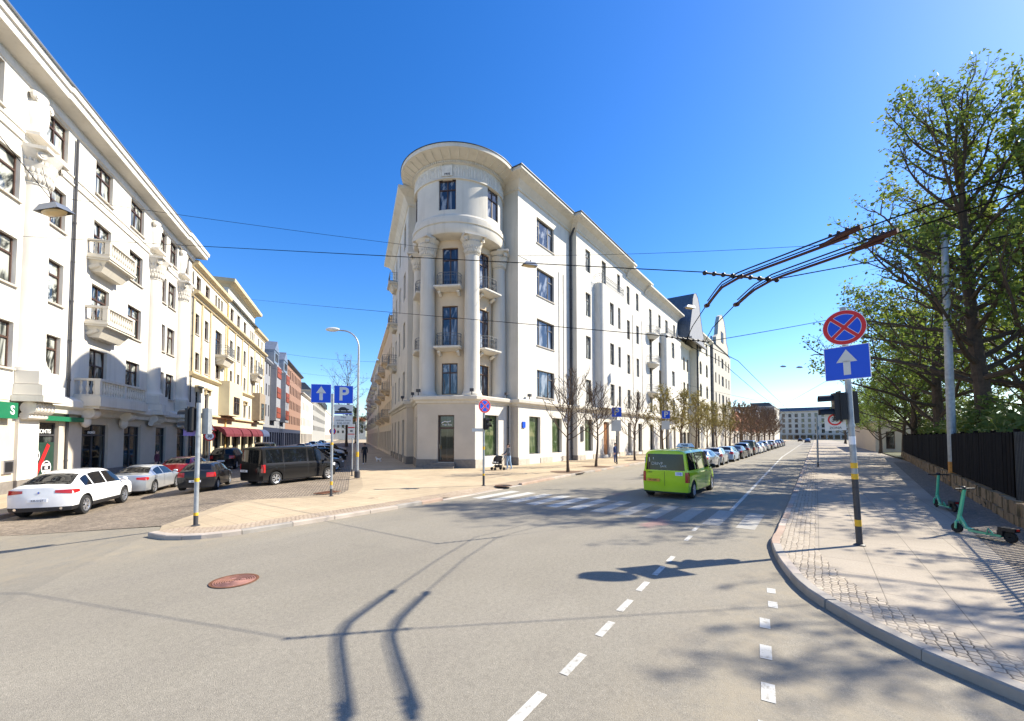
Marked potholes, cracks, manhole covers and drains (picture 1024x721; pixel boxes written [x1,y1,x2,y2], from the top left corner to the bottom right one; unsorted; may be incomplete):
manhole cover [208,573,259,588]
